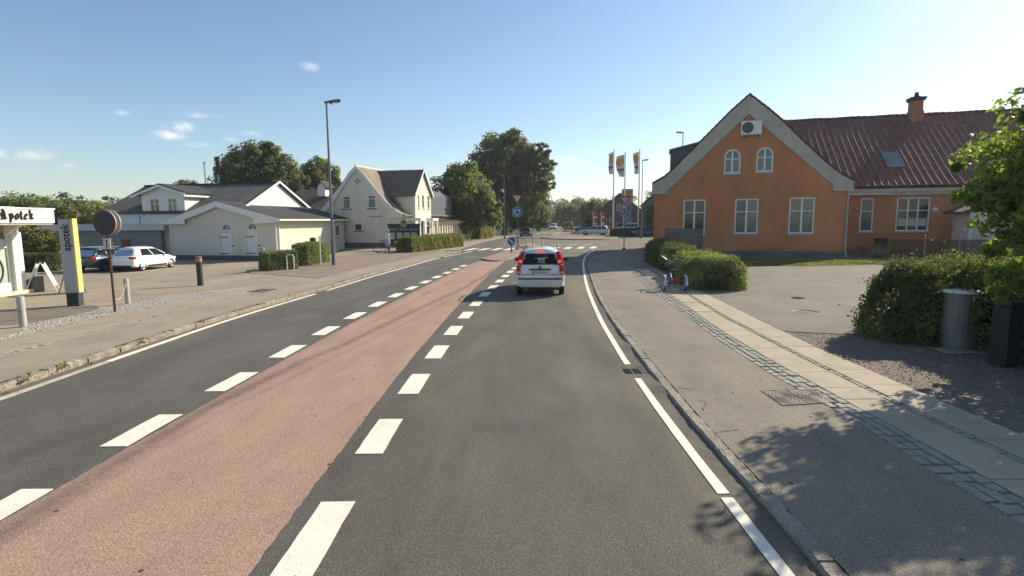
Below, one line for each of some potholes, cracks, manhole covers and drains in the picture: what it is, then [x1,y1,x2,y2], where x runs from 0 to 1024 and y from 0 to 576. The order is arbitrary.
manhole cover [761,388,838,407]
